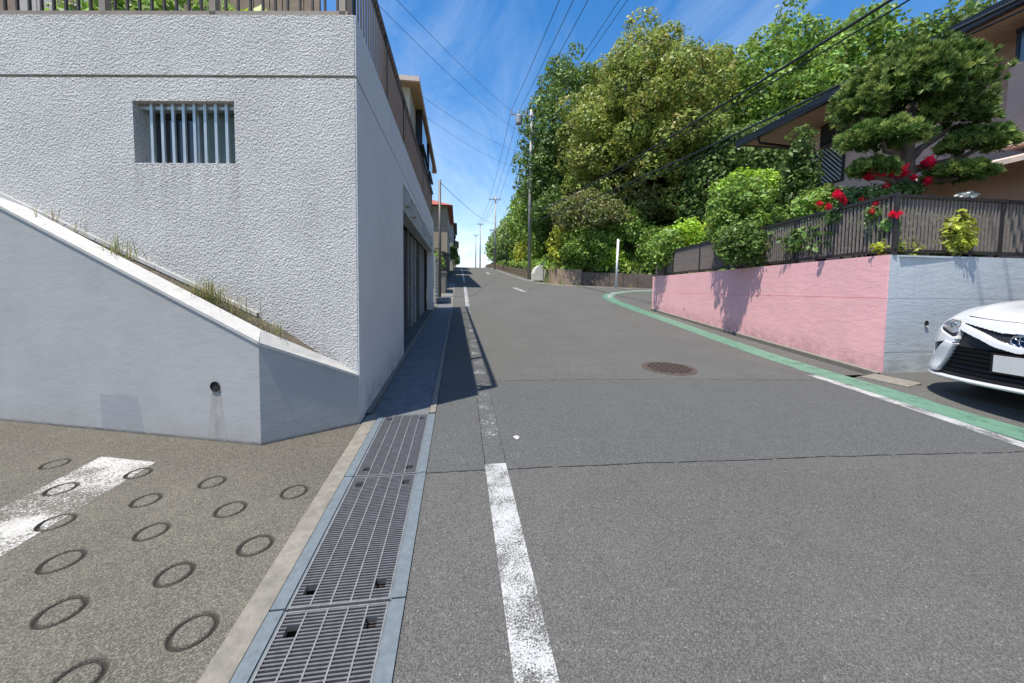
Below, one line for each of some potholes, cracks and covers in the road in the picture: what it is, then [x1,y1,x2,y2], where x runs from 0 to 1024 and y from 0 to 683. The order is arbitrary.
drain grate [344,413,435,477]
manhole cover [641,362,698,376]
drain grate [229,598,405,683]
drain grate [270,472,426,612]
